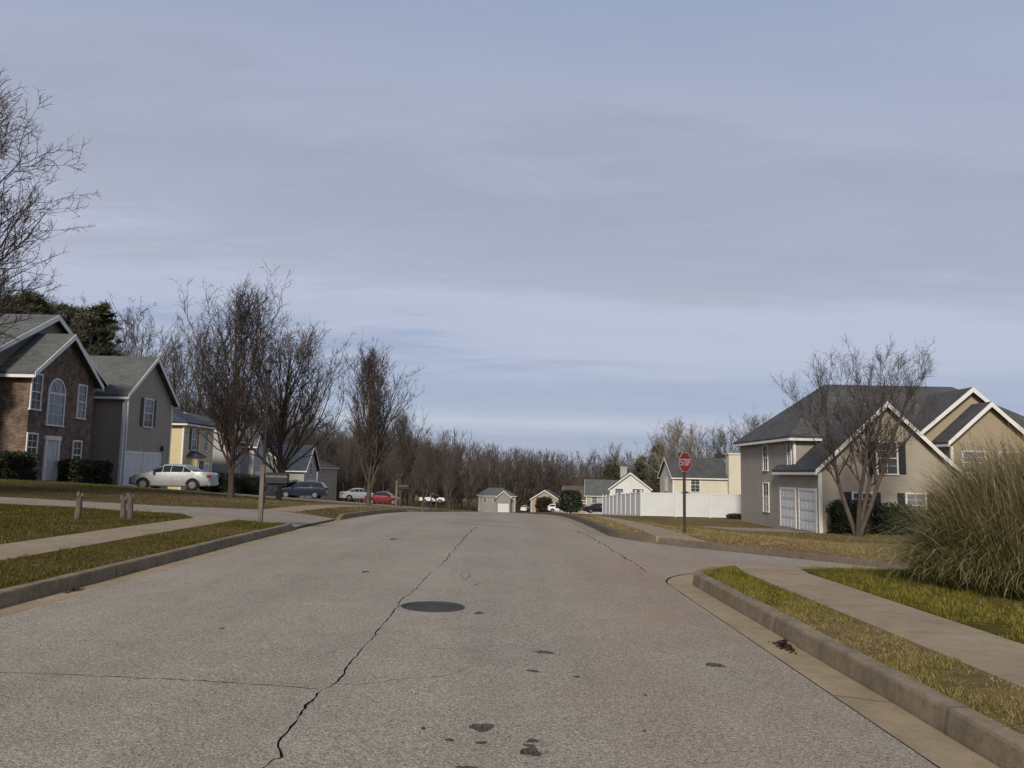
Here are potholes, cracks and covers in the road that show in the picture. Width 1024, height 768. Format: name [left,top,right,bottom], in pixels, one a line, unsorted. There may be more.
pothole [520,747,542,757]
crack [0,523,514,768]
manhole cover [401,601,465,612]
pothole [468,724,495,732]
